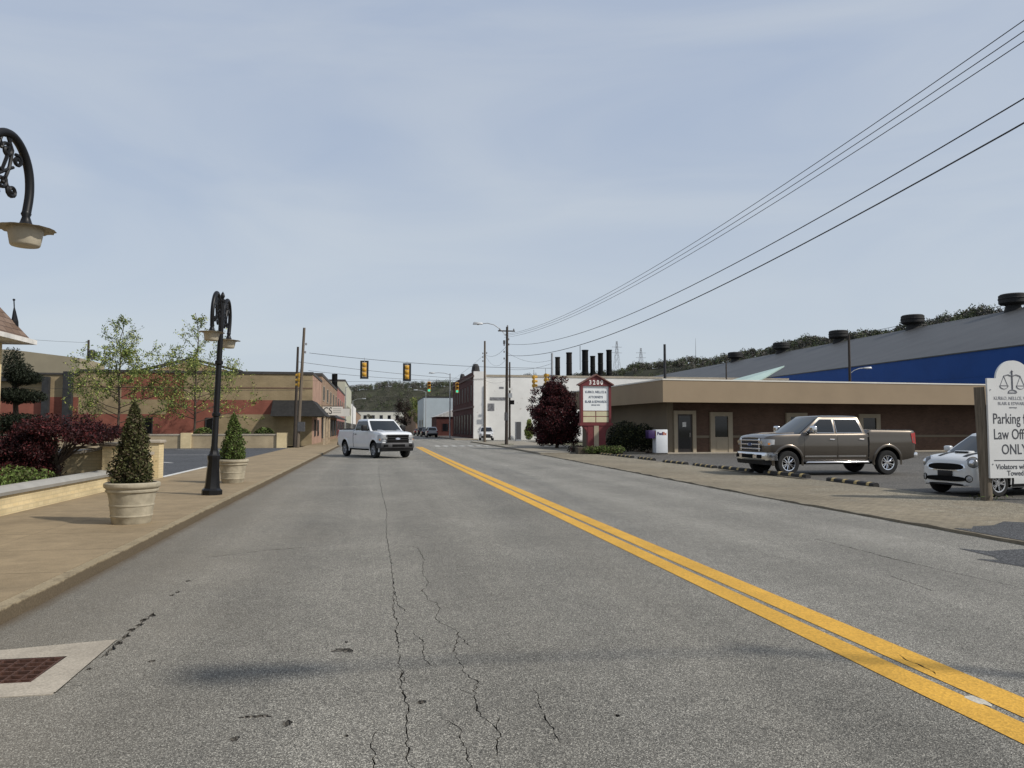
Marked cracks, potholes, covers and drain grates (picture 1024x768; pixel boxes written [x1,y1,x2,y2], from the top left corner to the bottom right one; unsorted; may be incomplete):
crack [533,689,561,744]
crack [379,477,502,768]
drain grate [0,639,117,698]
